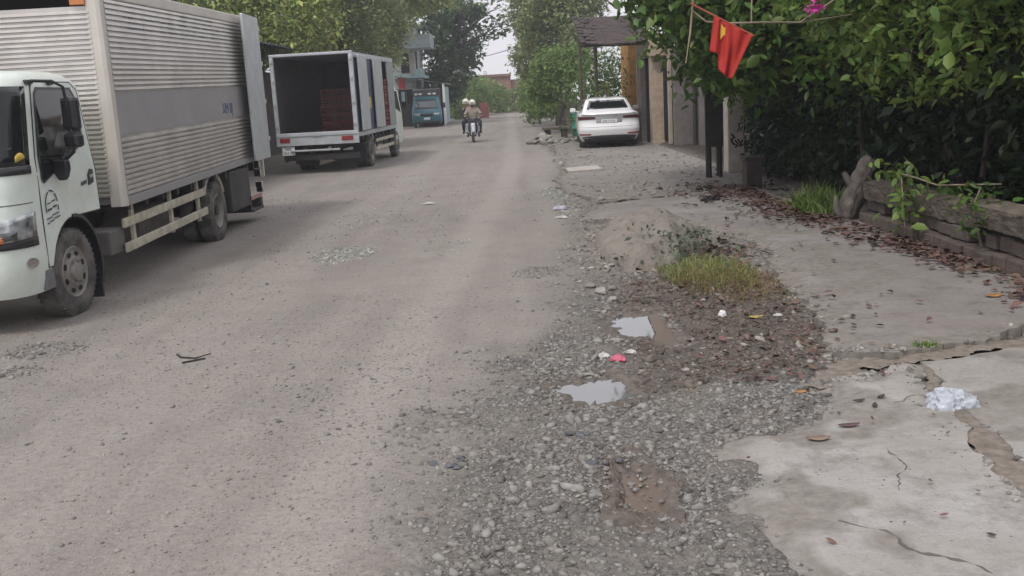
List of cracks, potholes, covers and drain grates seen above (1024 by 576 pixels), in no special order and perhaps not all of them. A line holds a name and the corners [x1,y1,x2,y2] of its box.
pothole [541,368,652,410]
pothole [599,444,687,533]
crack [838,520,996,575]
pothole [595,304,700,350]
crack [897,364,1024,492]
